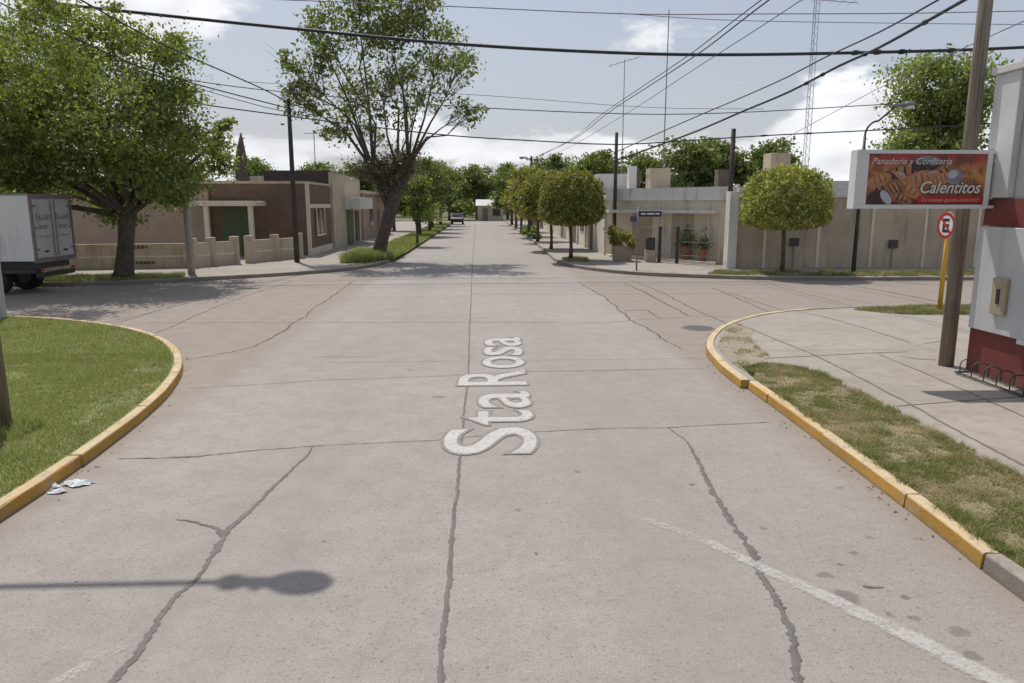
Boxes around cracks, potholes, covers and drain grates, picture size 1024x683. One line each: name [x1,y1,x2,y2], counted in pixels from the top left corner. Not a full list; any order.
crack [113,278,725,359]
